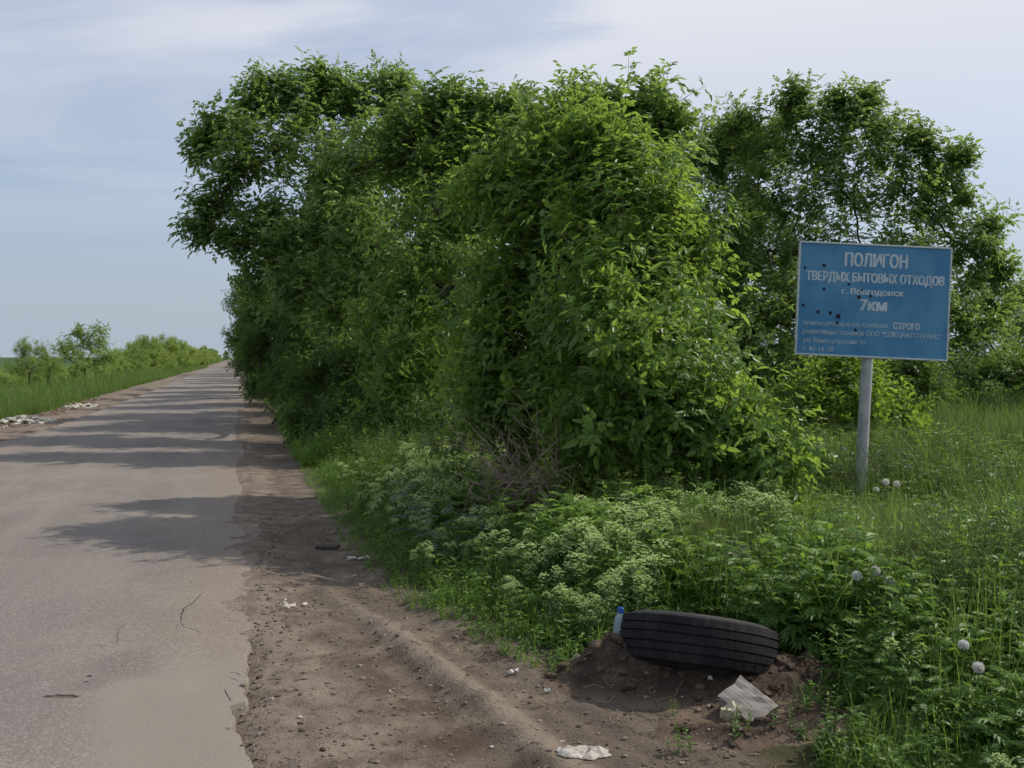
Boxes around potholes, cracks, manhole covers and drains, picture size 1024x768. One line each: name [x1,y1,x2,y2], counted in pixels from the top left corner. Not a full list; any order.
crack [176,581,203,633]
